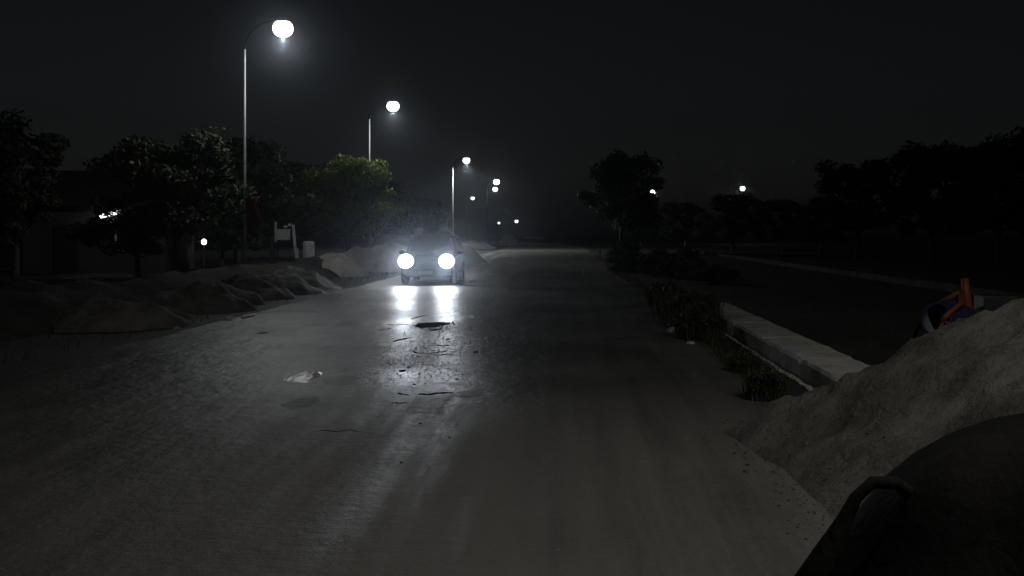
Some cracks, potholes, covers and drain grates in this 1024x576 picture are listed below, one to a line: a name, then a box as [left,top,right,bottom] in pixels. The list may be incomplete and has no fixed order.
crack [392,315,471,355]
crack [395,392,452,404]
